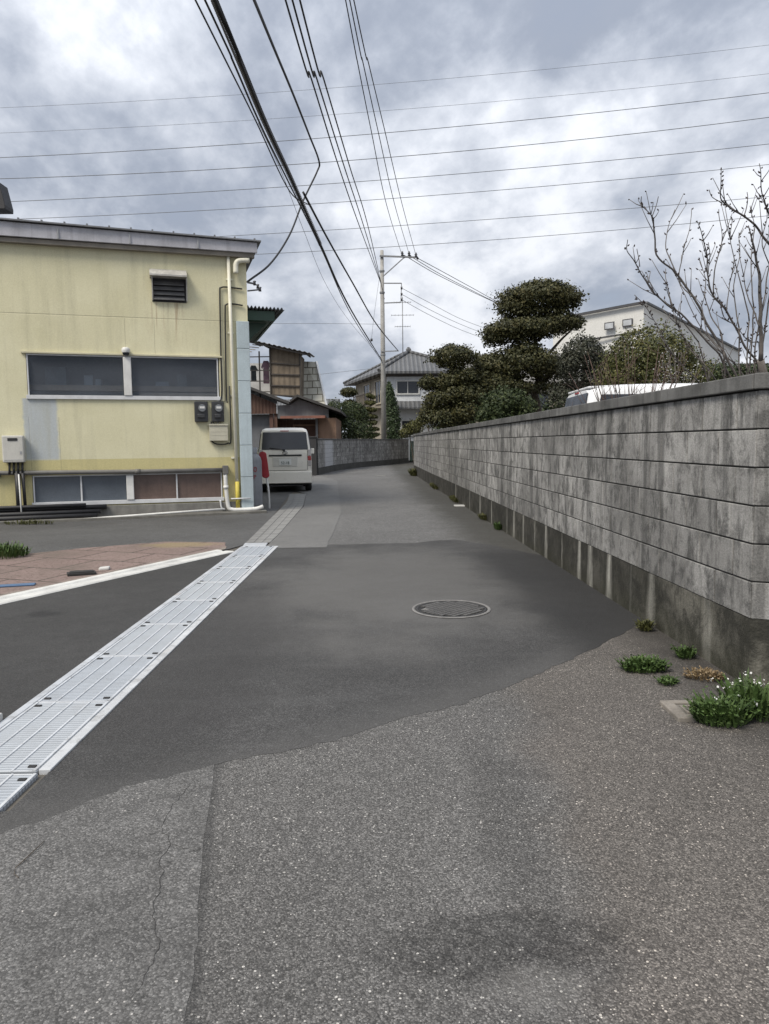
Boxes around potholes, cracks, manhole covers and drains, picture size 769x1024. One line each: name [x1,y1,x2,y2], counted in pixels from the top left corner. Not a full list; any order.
utility cover [659,700,699,722]
manhole cover [412,600,491,618]
crack [123,781,200,1008]
